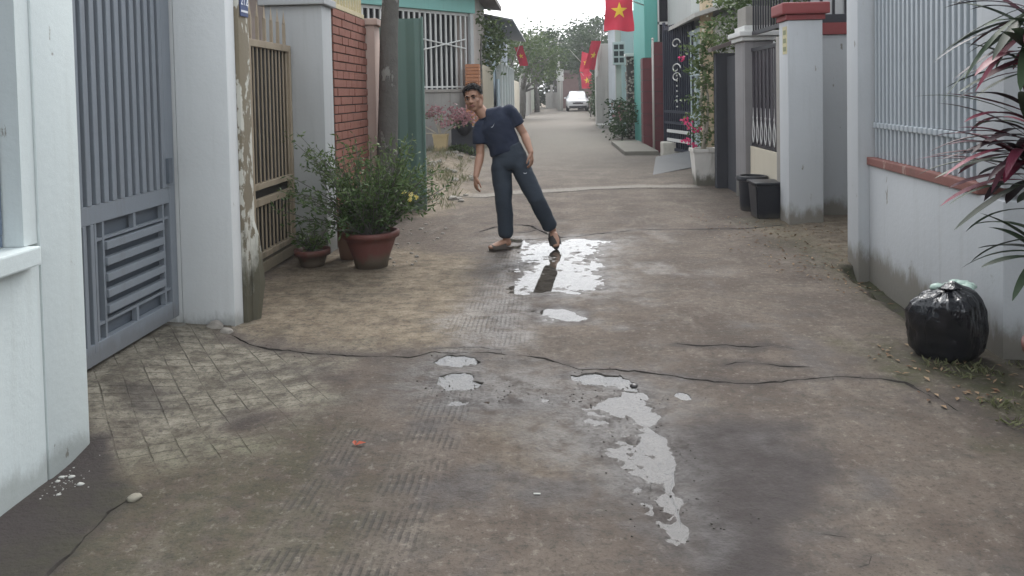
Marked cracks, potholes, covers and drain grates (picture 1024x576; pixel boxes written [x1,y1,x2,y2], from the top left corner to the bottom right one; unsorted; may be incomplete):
crack [44,500,127,576]
crack [230,334,958,411]
